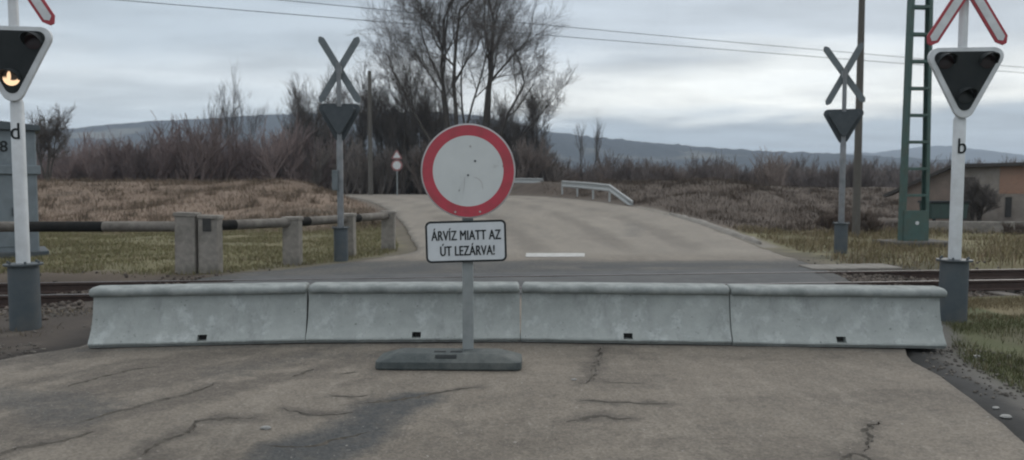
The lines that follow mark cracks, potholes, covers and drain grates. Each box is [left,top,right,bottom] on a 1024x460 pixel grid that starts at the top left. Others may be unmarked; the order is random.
crack [840,422,881,460]
crack [566,348,663,423]
crack [0,366,241,456]
crack [268,432,368,447]
